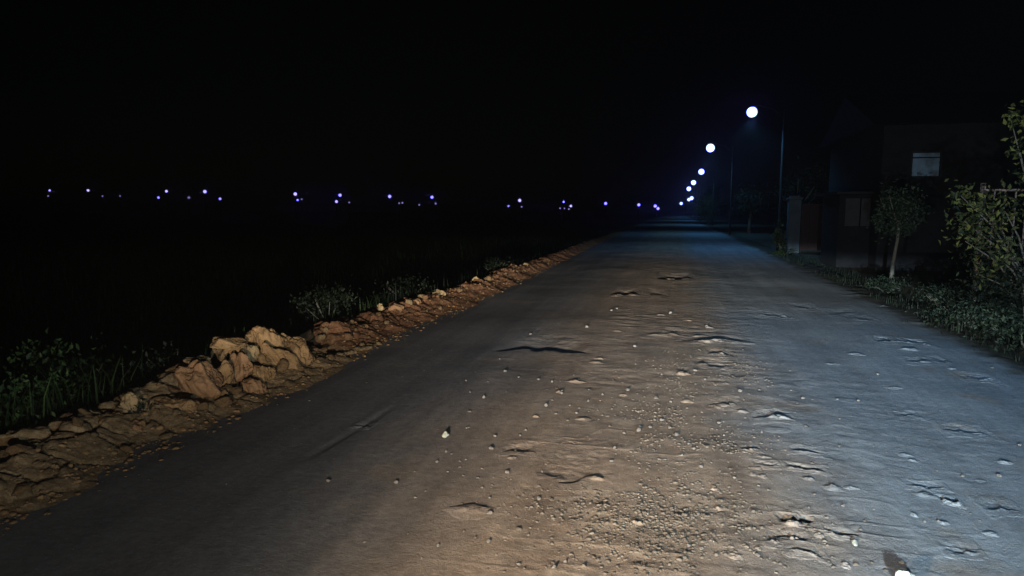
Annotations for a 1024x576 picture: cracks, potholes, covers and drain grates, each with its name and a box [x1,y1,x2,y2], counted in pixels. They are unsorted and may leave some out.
pothole [931,492,968,509]
pothole [782,442,834,460]
pothole [666,331,755,348]
pothole [745,404,805,427]
pothole [926,419,1008,443]
pothole [777,459,833,476]
pothole [767,504,822,537]
pothole [602,287,651,301]
pothole [650,267,702,284]
